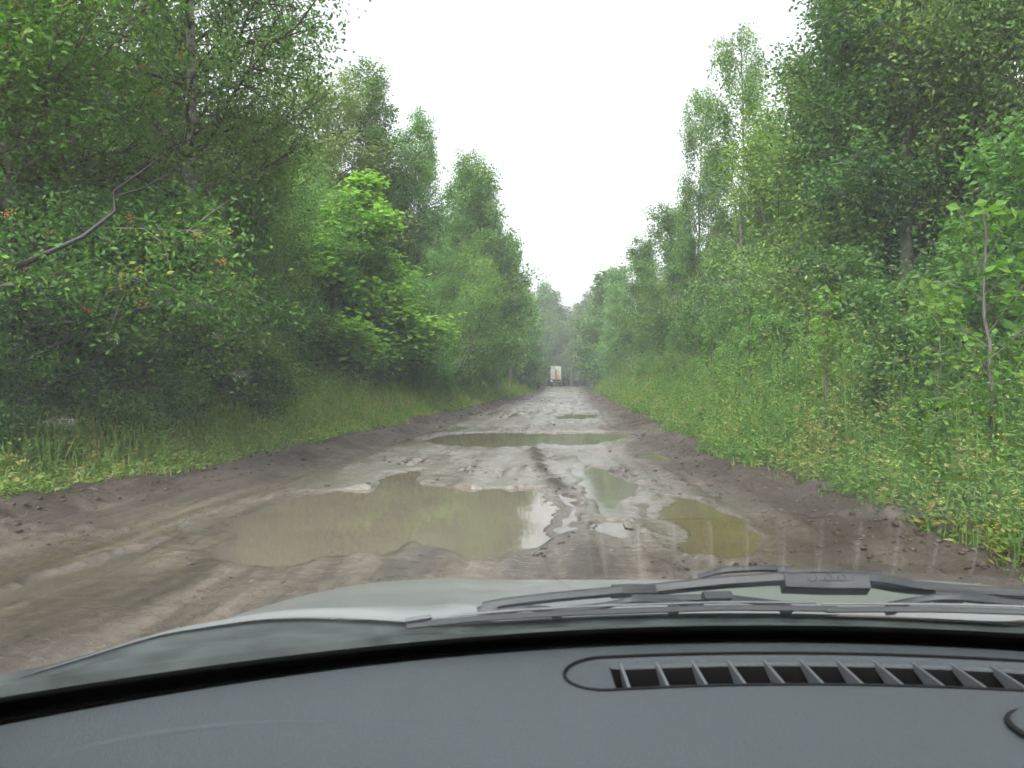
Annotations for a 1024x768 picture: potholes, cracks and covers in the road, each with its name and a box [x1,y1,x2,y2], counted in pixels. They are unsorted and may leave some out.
pothole [411,430,642,448]
pothole [150,467,598,572]
pothole [622,491,782,561]
pothole [550,412,601,420]
